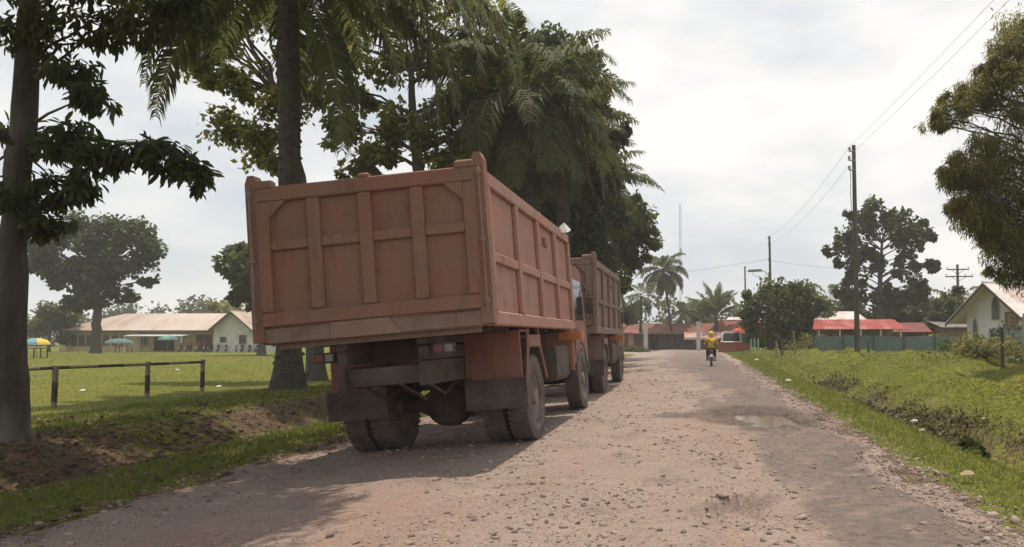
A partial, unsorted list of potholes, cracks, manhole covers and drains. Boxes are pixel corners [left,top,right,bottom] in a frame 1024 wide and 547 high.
pothole [659,405,838,429]
pothole [682,489,859,534]
